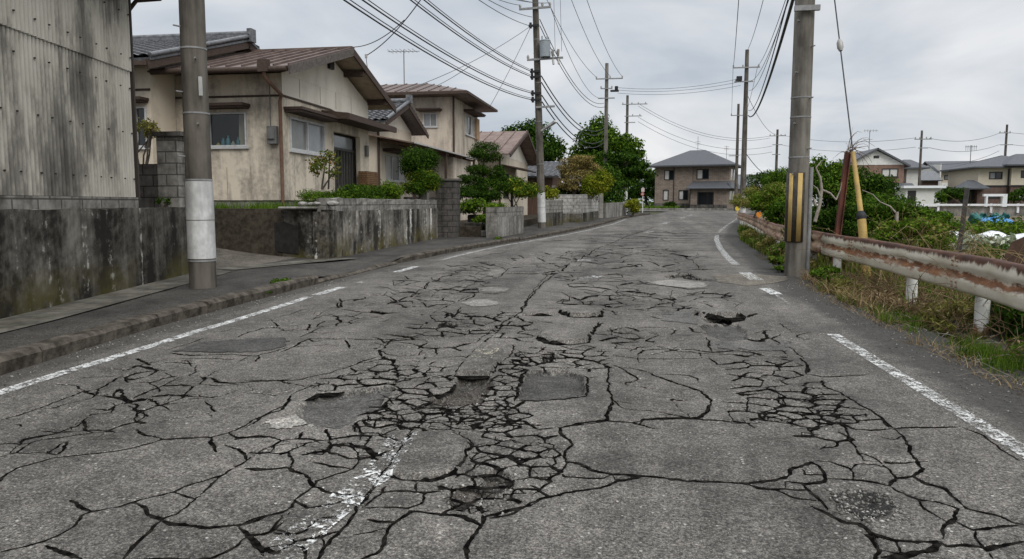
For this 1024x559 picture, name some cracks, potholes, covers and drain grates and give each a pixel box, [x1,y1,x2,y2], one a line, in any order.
pothole [447,471,515,512]
pothole [429,378,494,408]
pothole [300,385,396,429]
crack [0,224,1024,559]
